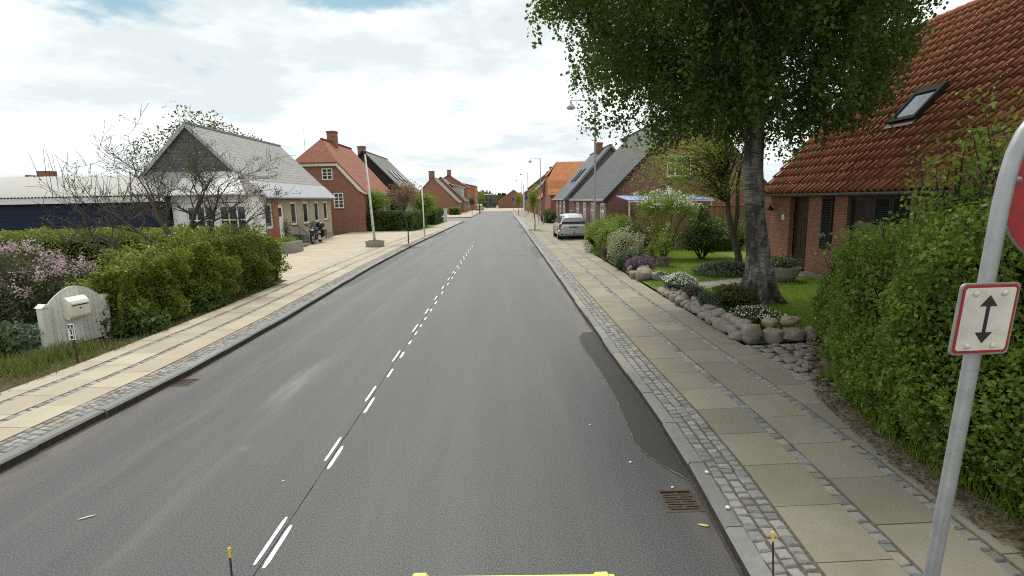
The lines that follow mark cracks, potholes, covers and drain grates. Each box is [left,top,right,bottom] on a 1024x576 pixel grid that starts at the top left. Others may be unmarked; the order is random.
drain grate [169,378,202,387]
drain grate [655,489,706,513]
